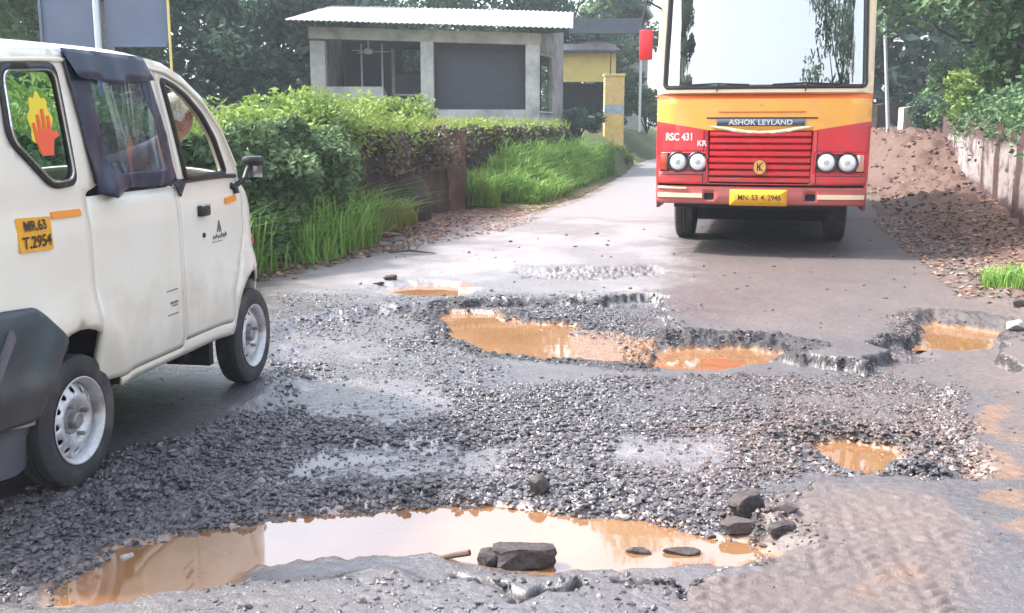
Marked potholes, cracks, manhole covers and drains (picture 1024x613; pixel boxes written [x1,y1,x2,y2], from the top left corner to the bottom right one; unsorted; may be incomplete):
pothole [17,491,800,609]
pothole [373,282,482,296]
pothole [428,301,663,366]
pothole [912,316,1006,354]
pothole [506,264,671,281]
pothole [794,427,919,475]
pothole [638,338,803,372]
